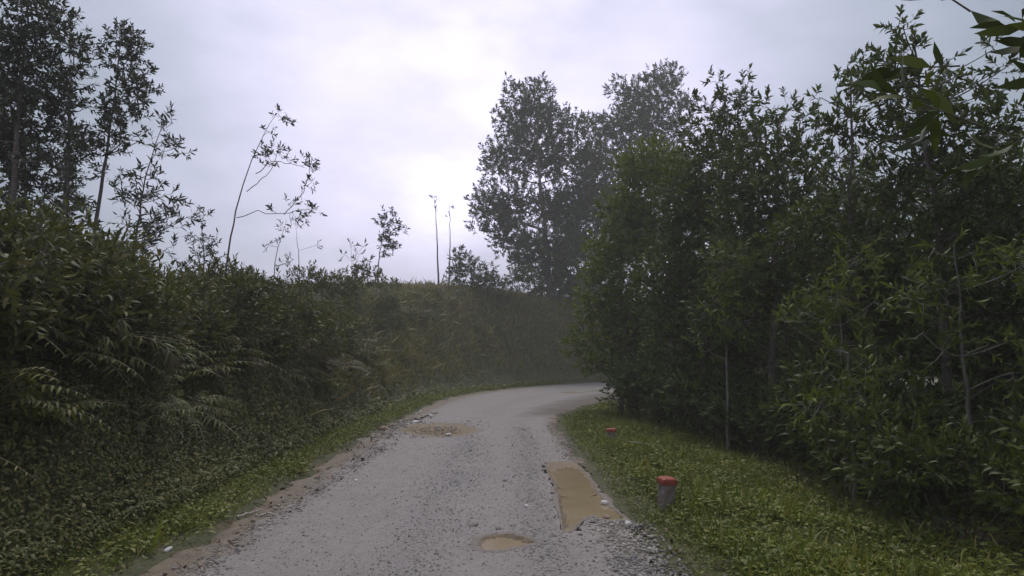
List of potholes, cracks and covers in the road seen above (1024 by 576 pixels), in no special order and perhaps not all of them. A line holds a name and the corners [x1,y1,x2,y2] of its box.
pothole [469,531,546,553]
pothole [544,461,630,533]
pothole [394,423,483,438]
